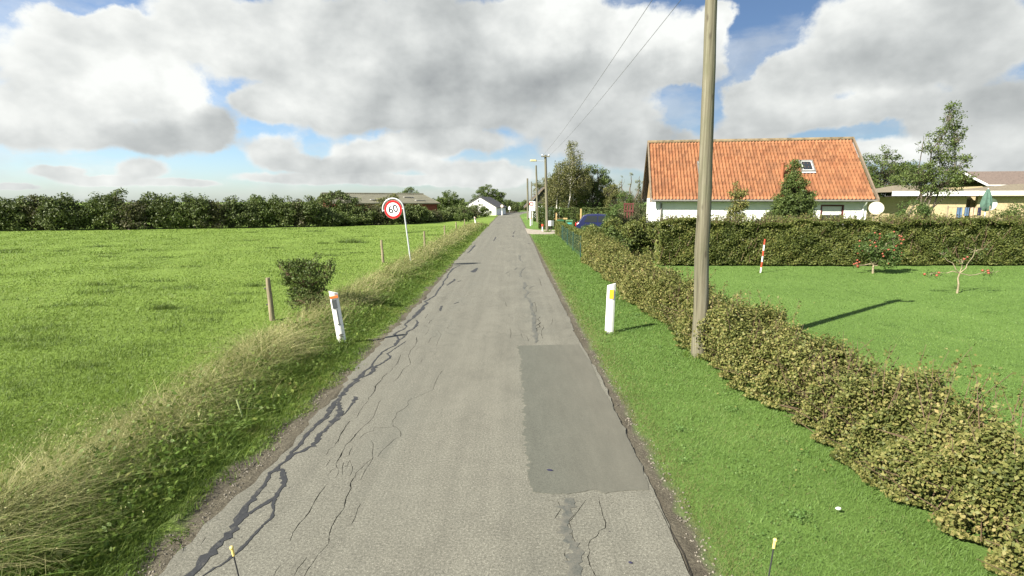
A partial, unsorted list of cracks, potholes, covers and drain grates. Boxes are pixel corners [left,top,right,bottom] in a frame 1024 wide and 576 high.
crack [291,322,442,572]
